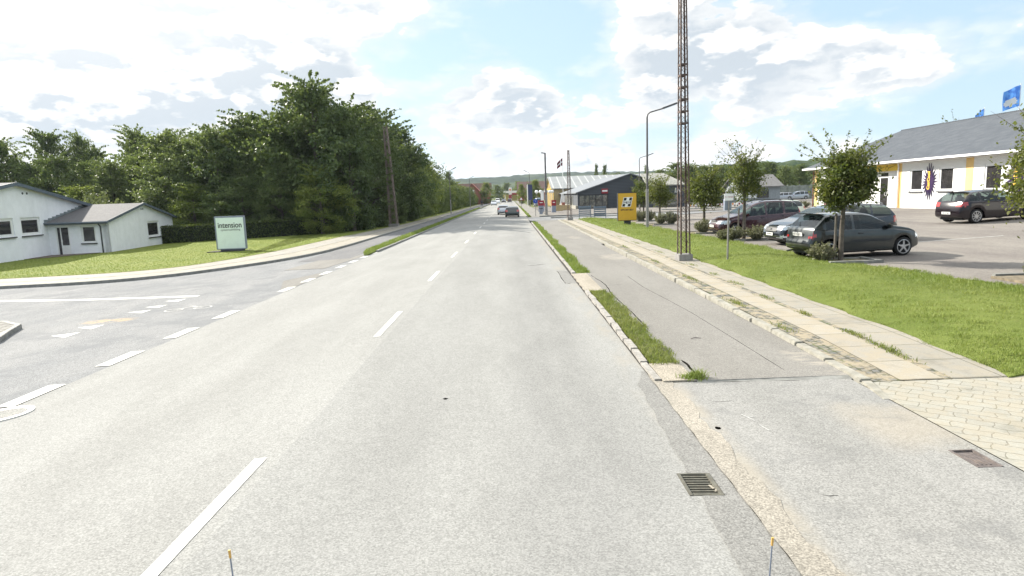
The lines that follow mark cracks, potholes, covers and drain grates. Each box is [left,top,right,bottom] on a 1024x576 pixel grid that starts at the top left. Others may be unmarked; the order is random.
manhole cover [948,449,1004,468]
crack [629,277,796,382]
drain grate [677,473,724,496]
